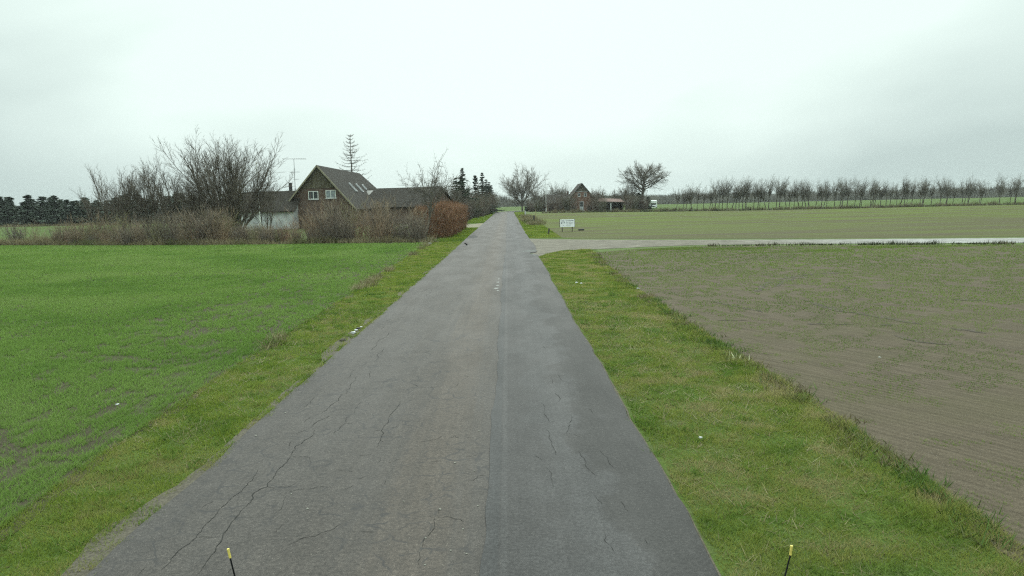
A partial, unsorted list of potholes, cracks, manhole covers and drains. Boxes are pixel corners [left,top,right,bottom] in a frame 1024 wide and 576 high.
crack [162,333,389,572]
